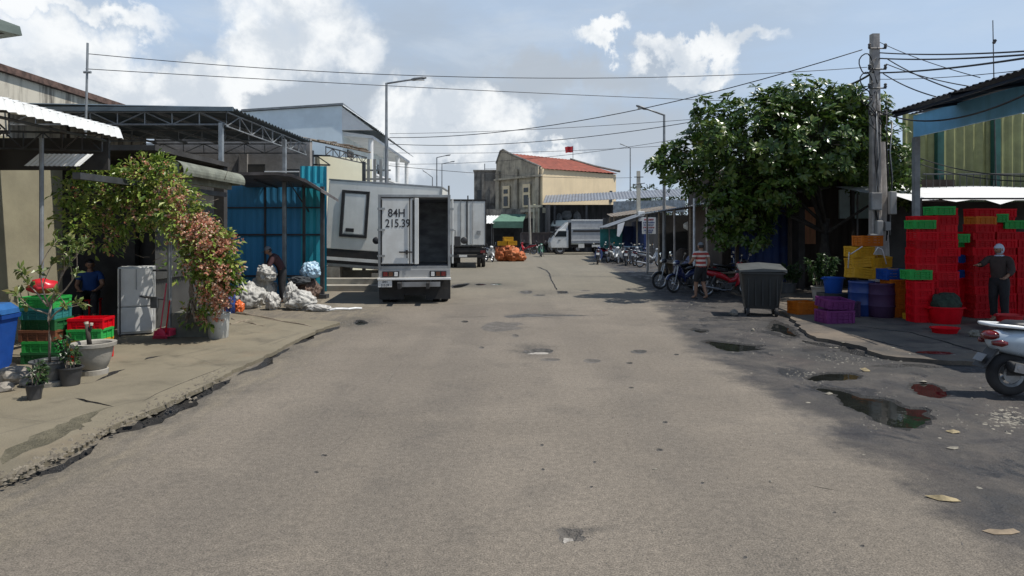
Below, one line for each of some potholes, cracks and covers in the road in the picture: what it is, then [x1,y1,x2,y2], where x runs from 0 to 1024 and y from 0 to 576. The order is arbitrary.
pothole [700,339,766,352]
pothole [556,527,587,544]
pothole [811,385,937,431]
crack [802,326,982,368]
pothole [803,372,864,381]
pothole [766,320,801,339]
